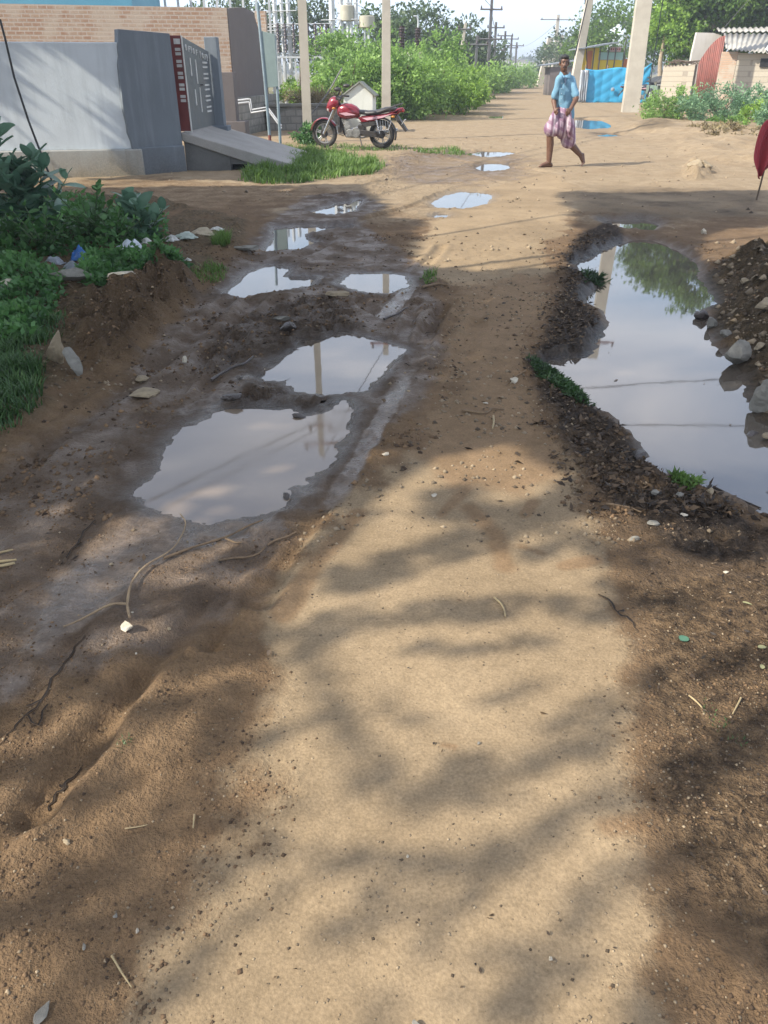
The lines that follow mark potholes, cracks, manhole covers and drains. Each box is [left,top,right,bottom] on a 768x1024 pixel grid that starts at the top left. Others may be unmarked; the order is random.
pothole [83,390,389,545]
pothole [212,259,327,299]
pothole [241,321,420,402]
pothole [257,221,330,251]
pothole [320,267,426,297]
pothole [299,193,373,215]
pothole [532,233,768,513]
